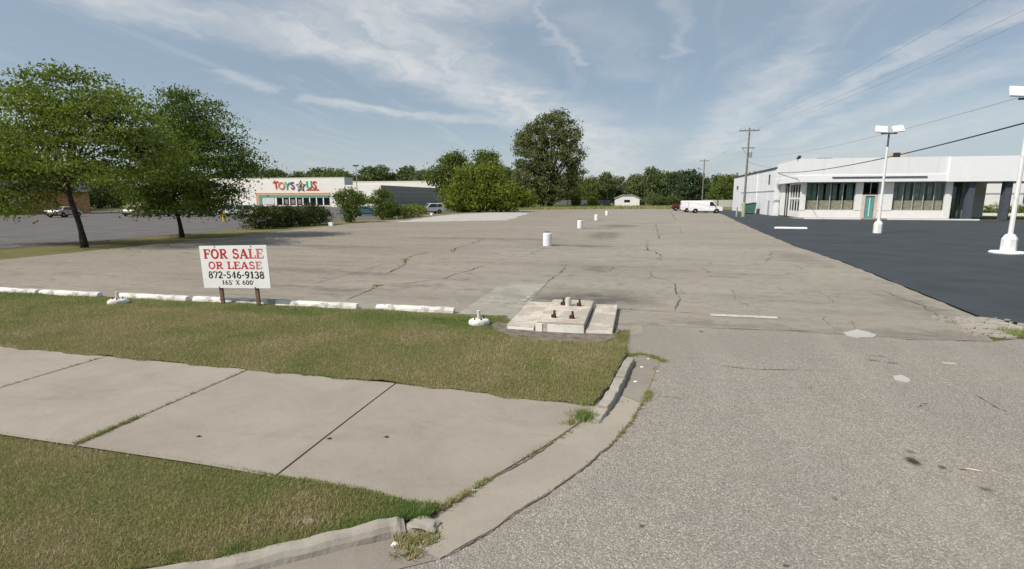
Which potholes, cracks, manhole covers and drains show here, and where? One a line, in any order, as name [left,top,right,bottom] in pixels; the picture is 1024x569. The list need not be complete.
crack [282,239,495,300]
crack [609,210,682,312]
